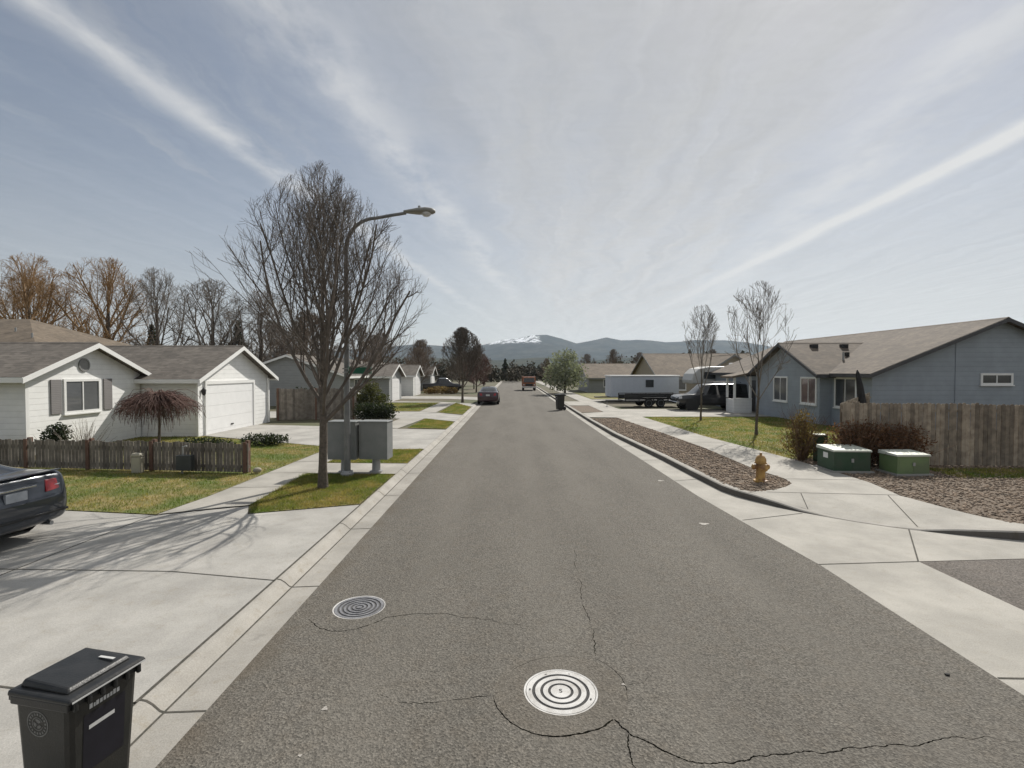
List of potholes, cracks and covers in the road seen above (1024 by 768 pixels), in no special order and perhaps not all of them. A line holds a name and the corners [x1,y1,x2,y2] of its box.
manhole cover [332,596,386,619]
crack [377,551,988,768]
crack [311,613,516,632]
manhole cover [524,669,598,716]
